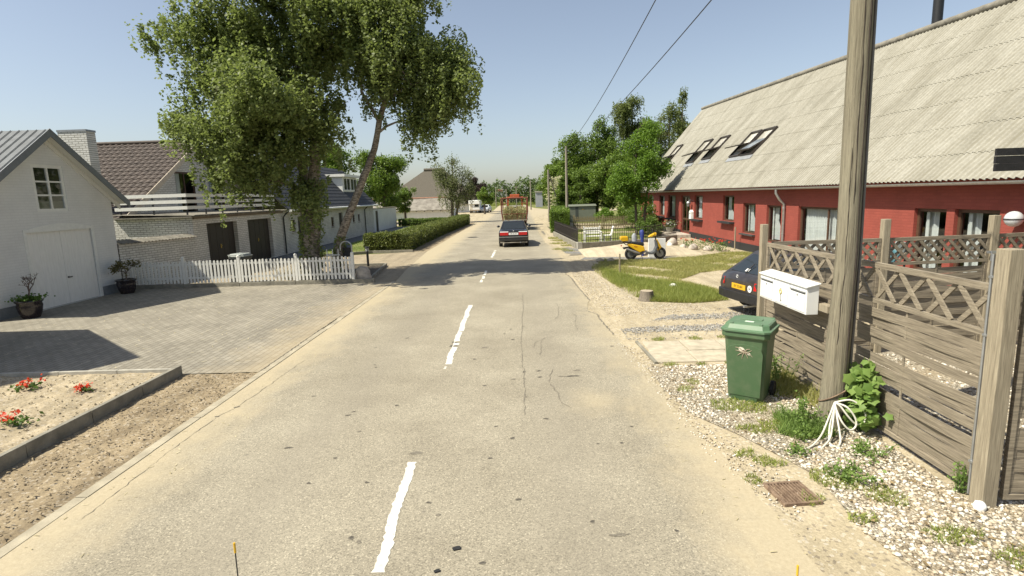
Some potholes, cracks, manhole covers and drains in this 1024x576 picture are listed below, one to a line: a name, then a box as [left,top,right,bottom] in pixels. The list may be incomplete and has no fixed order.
drain grate [763,480,823,507]
crack [520,294,571,413]
crack [555,273,614,335]
